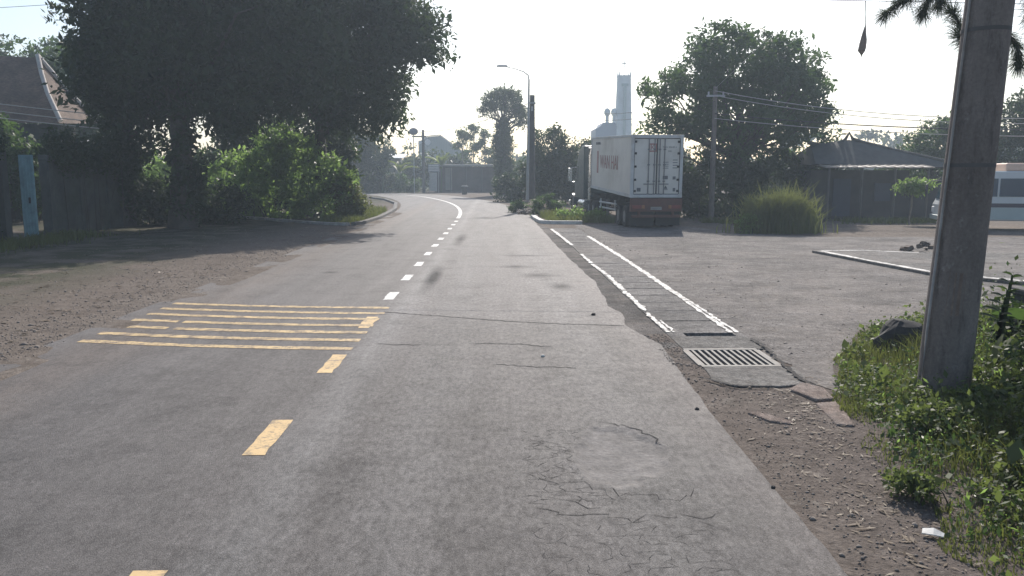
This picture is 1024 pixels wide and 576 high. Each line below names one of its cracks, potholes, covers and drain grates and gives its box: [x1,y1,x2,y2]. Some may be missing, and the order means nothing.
drain grate [682,348,782,368]
crack [521,429,736,576]
